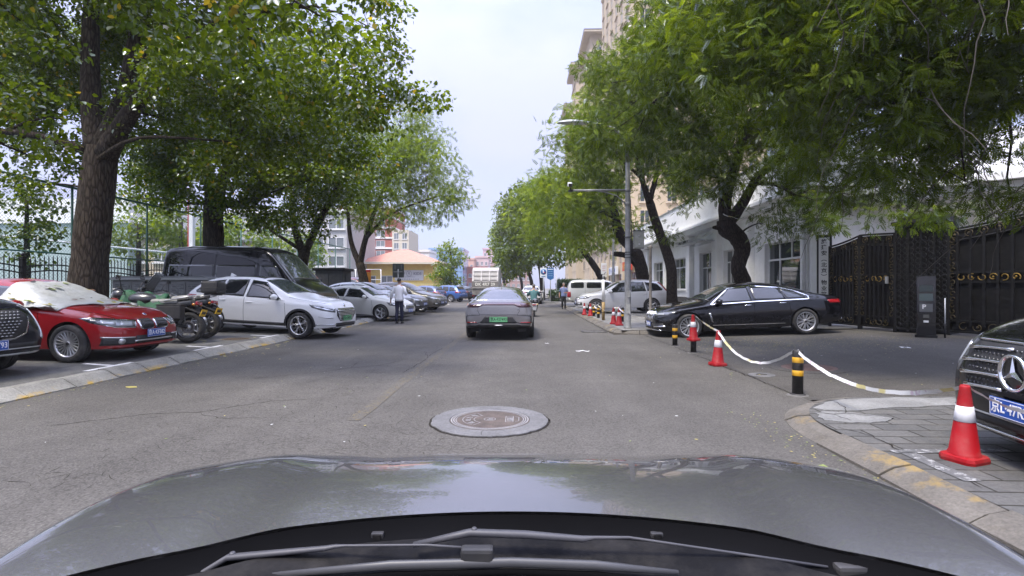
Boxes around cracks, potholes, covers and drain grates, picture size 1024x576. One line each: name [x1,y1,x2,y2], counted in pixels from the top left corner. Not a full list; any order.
manhole cover [429,406,551,438]
